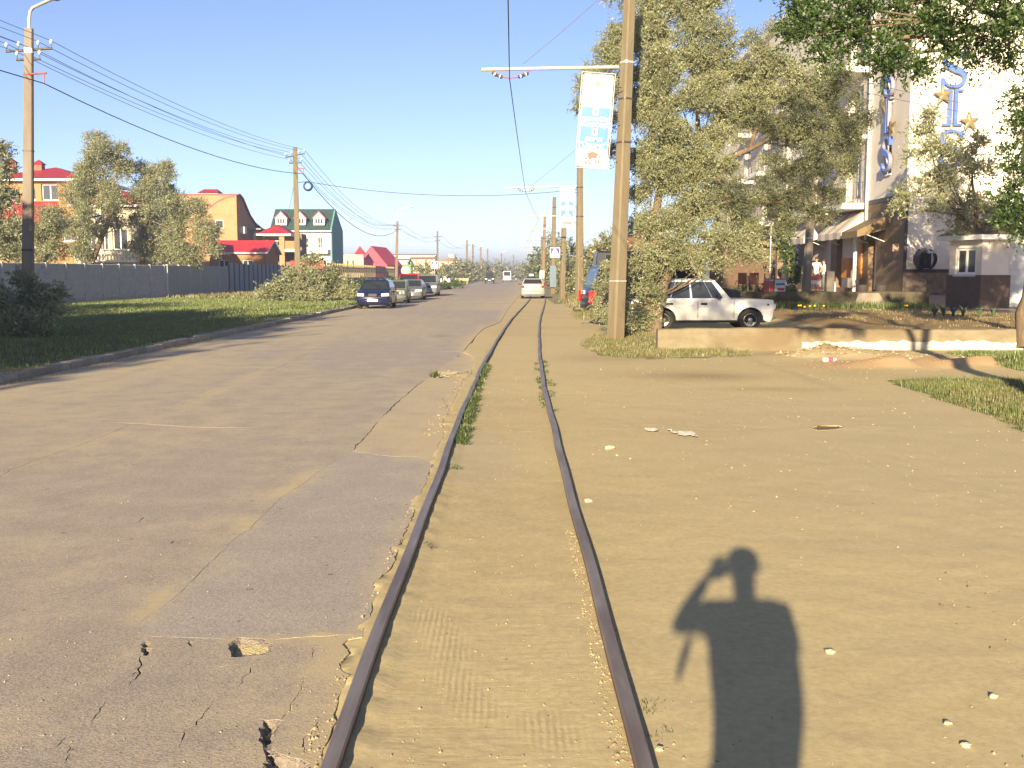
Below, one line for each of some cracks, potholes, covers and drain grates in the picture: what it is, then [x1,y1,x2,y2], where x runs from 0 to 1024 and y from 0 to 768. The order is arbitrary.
crack [283,678,320,752]
crack [353,379,426,457]
crack [130,656,142,683]
pothole [227,638,275,657]
pothole [258,720,311,768]
